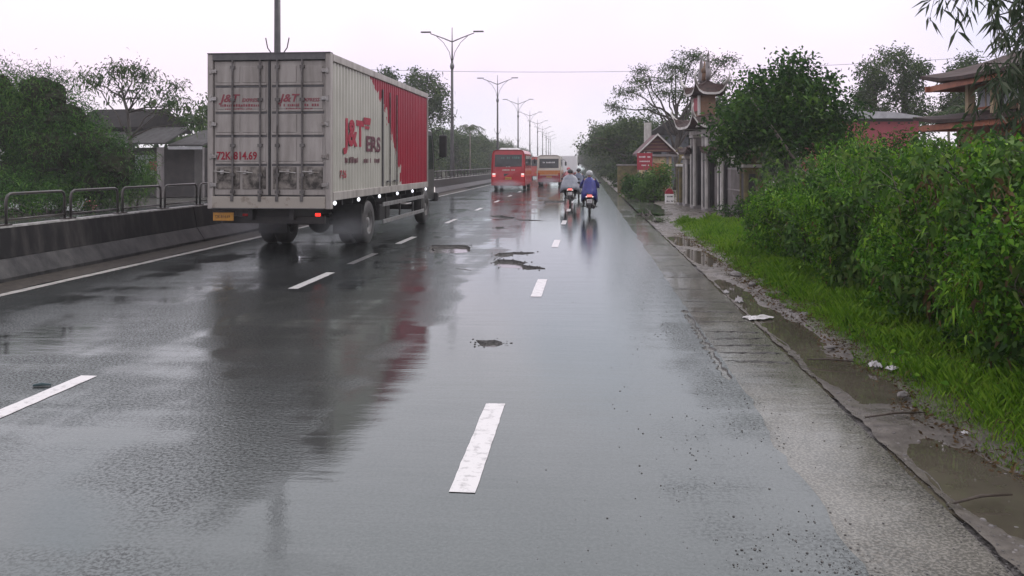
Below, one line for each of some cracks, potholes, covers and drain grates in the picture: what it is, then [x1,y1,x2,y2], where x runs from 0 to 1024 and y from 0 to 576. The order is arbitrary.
pothole [423,244,472,253]
pothole [491,258,545,270]
pothole [472,338,512,347]
